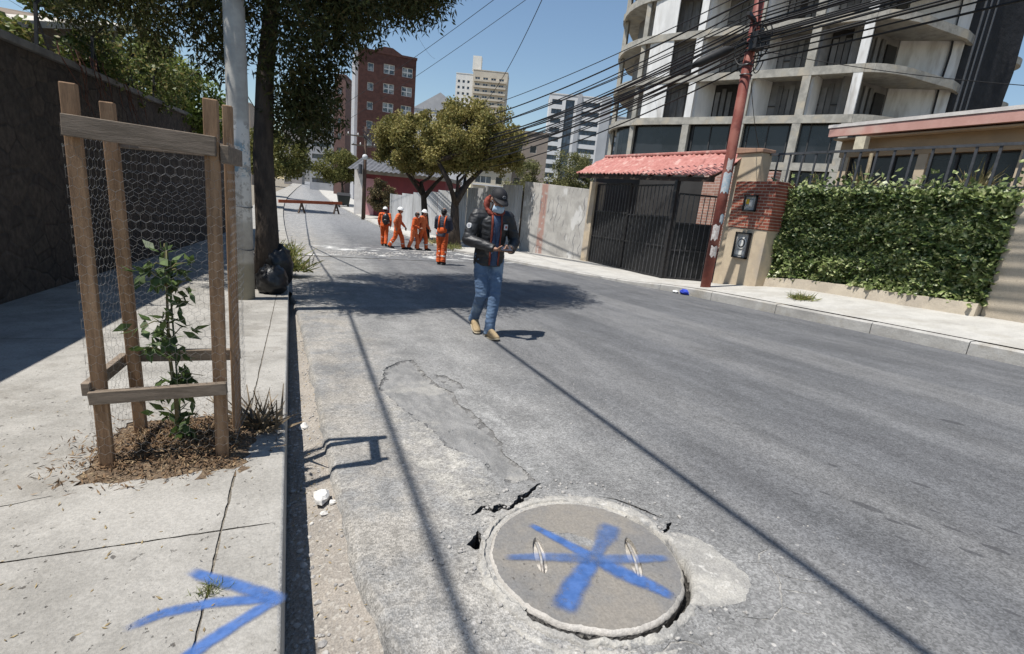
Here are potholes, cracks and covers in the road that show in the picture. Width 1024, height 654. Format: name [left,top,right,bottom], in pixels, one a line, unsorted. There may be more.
manhole cover [477,495,751,654]
pothole [467,531,481,550]
crack [472,483,541,515]
